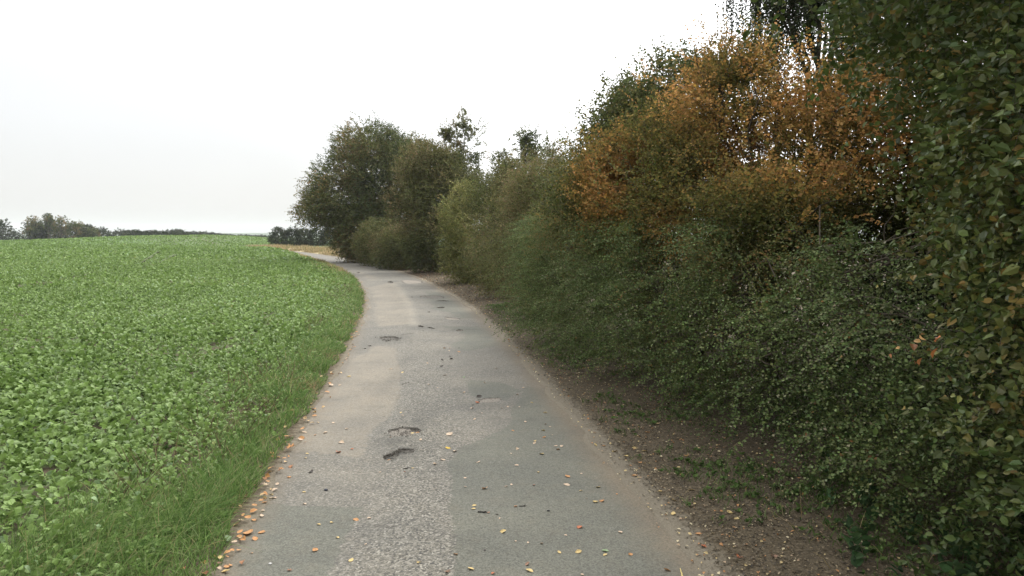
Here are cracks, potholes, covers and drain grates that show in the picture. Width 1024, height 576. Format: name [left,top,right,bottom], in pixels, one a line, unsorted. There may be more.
pothole [384,425,427,438]
pothole [383,445,420,461]
